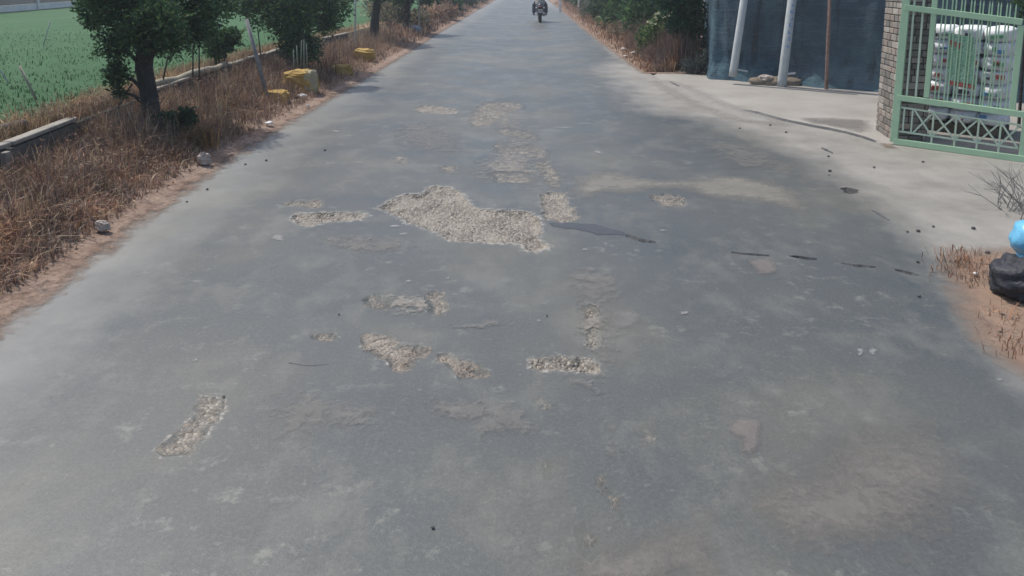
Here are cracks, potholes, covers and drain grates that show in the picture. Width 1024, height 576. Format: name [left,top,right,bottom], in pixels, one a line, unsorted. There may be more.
pothole [290,212,368,226]
pothole [155,396,225,457]
pothole [413,105,460,114]
pothole [424,290,450,318]
pothole [436,353,491,381]
pothole [585,327,602,352]
pothole [649,192,689,207]
pothole [581,304,601,320]
pothole [531,160,564,189]
pothole [530,356,601,373]
pothole [468,101,525,128]
